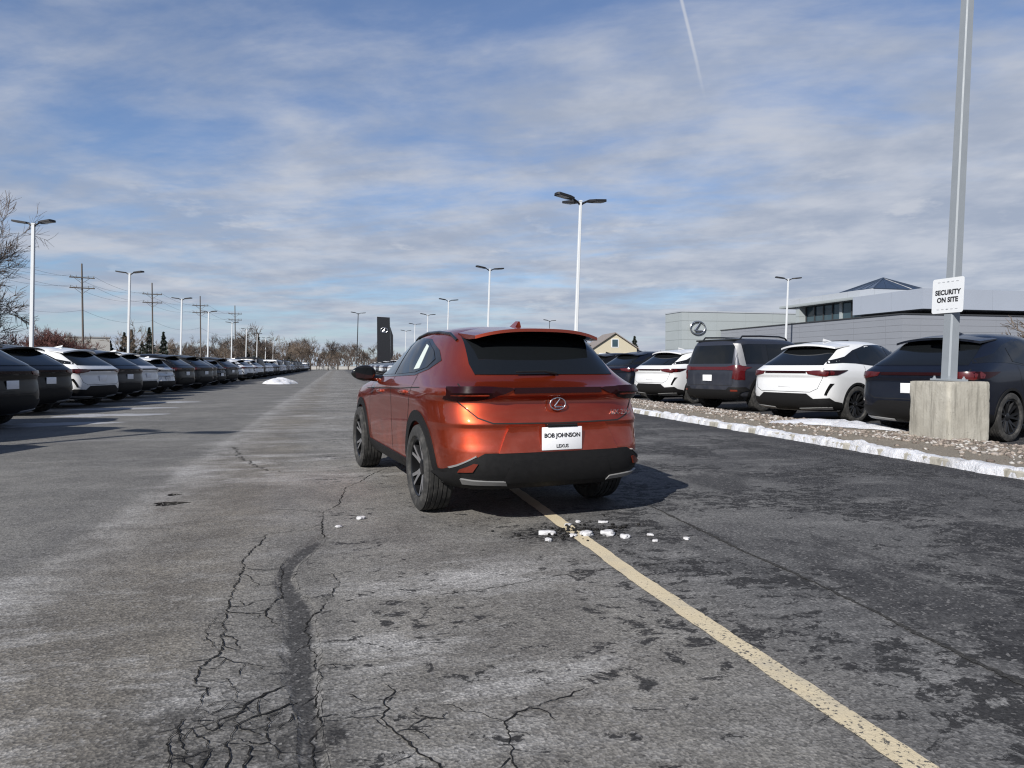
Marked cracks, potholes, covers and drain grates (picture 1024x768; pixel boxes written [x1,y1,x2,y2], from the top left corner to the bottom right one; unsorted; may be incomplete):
crack [150,465,584,768]
